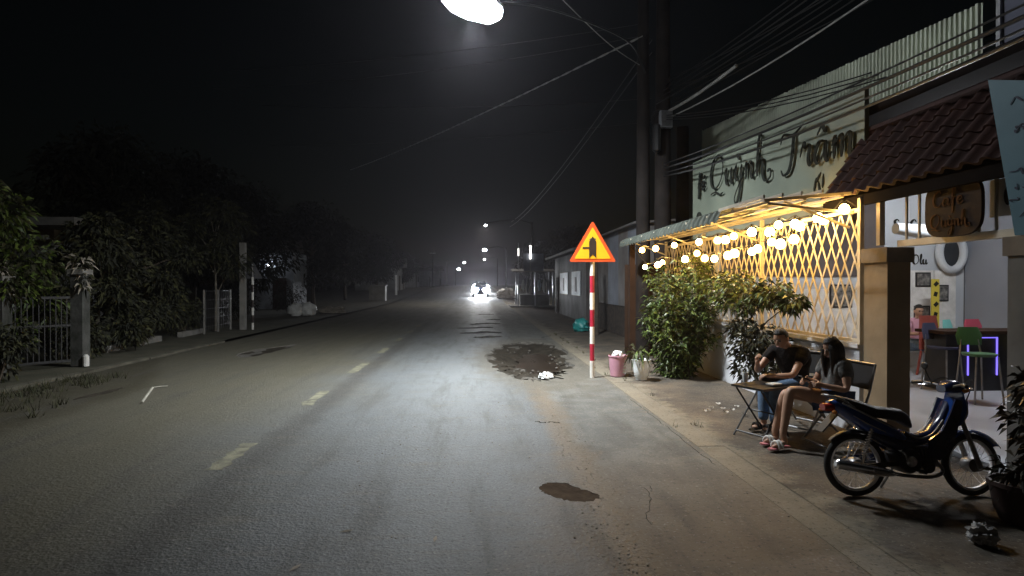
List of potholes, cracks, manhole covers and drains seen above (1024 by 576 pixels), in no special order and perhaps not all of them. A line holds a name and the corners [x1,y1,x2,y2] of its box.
pothole [484,342,575,382]
crack [457,314,502,338]
pothole [539,482,600,502]
